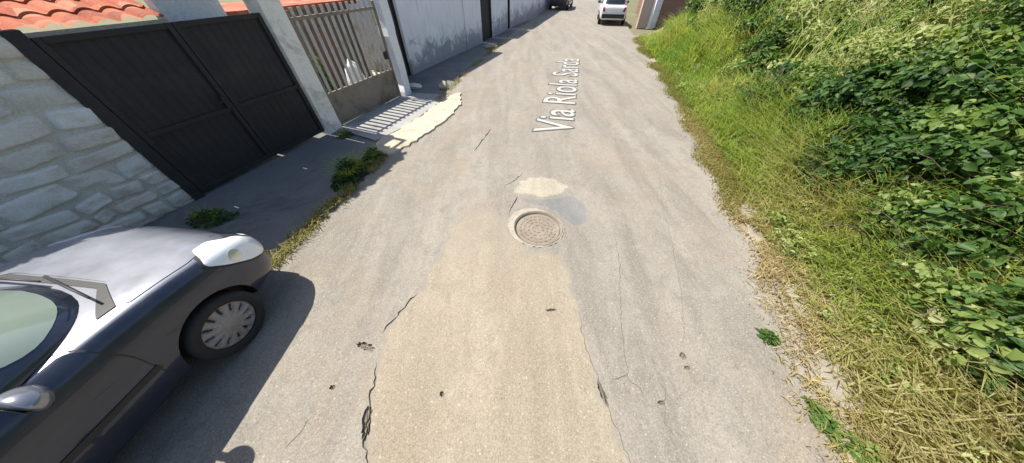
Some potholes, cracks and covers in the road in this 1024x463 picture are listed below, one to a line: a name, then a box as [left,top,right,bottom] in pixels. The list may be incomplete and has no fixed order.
crack [362,363,377,463]
pothole [357,342,375,352]
manhole cover [508,208,564,248]
crack [383,293,418,332]
crack [578,233,645,463]
